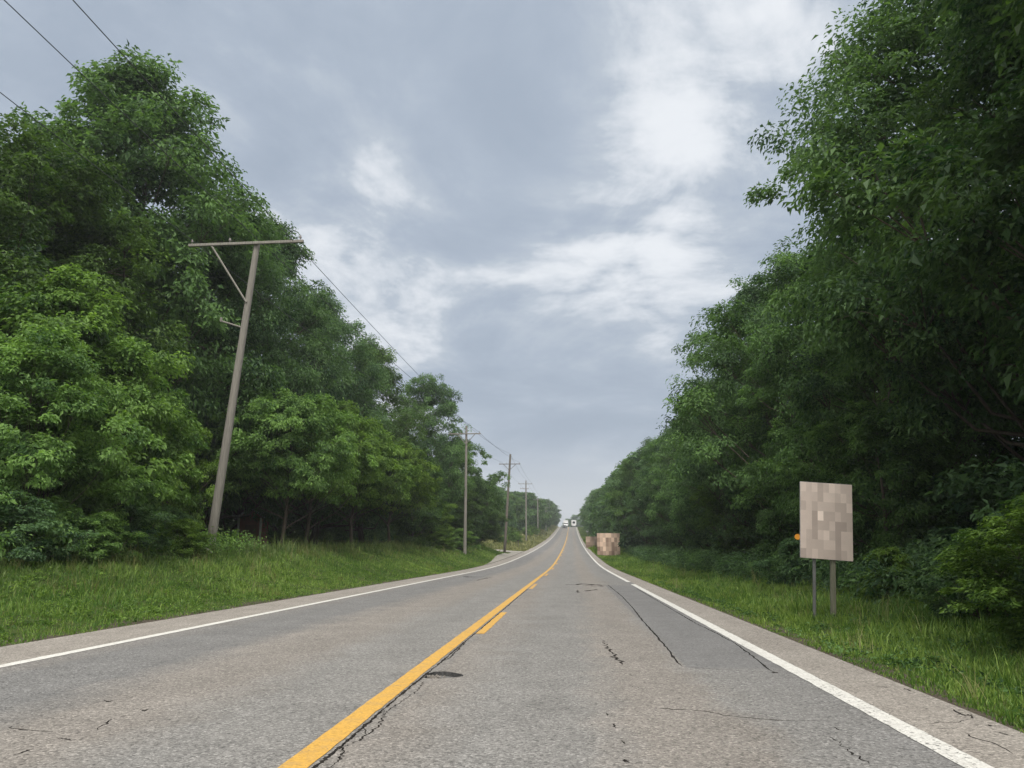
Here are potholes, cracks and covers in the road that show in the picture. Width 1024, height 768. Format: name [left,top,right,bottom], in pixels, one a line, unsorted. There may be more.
crack [639,590,778,673]
crack [933,710,1012,752]
pothole [424,671,463,679]
crack [661,708,870,764]
